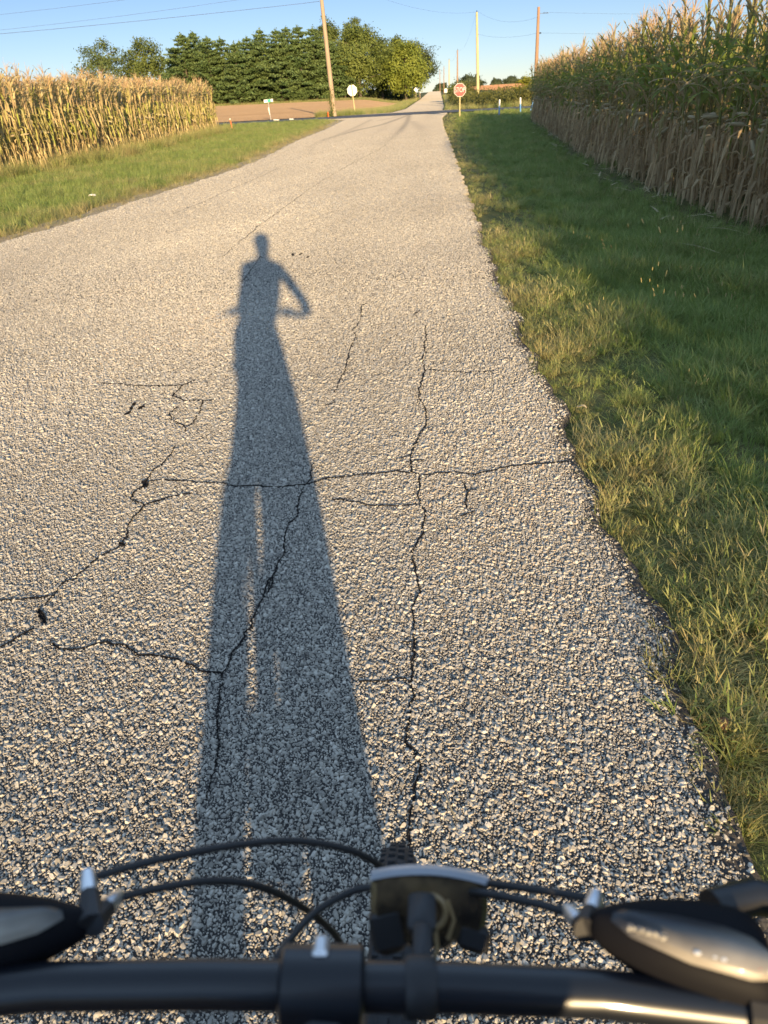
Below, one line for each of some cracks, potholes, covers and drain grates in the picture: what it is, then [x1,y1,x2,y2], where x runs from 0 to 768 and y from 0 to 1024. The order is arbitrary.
crack [0,310,568,847]
